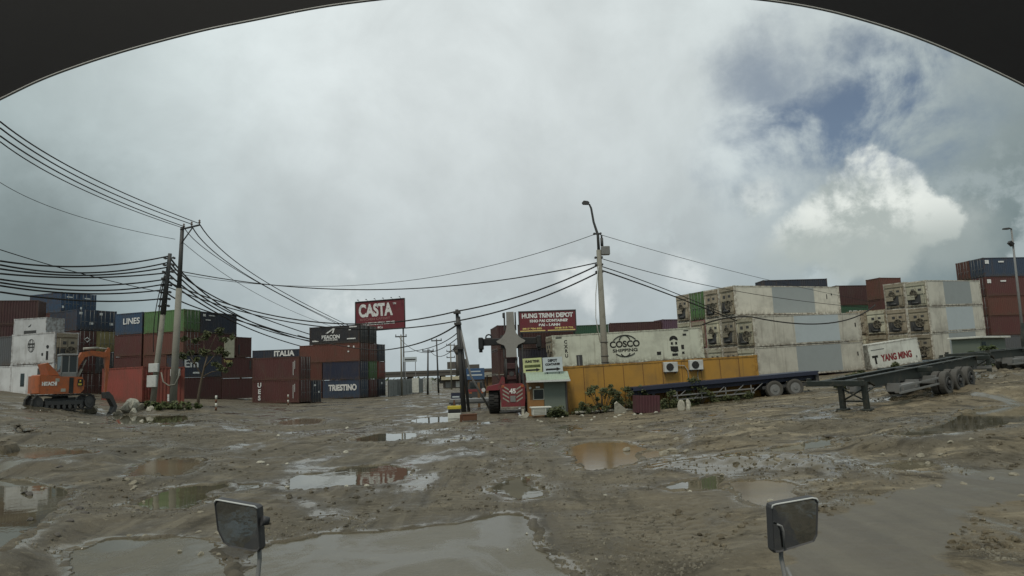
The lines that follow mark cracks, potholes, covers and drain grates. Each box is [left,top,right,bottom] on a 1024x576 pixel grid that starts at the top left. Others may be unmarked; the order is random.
pothole [0,477,78,551]
pothole [564,440,653,471]
pothole [485,475,550,500]
pothole [349,431,423,442]
pothole [282,463,414,491]
pothole [406,416,460,424]
pothole [121,480,239,511]
pothole [123,456,206,477]
pothole [656,473,733,491]
